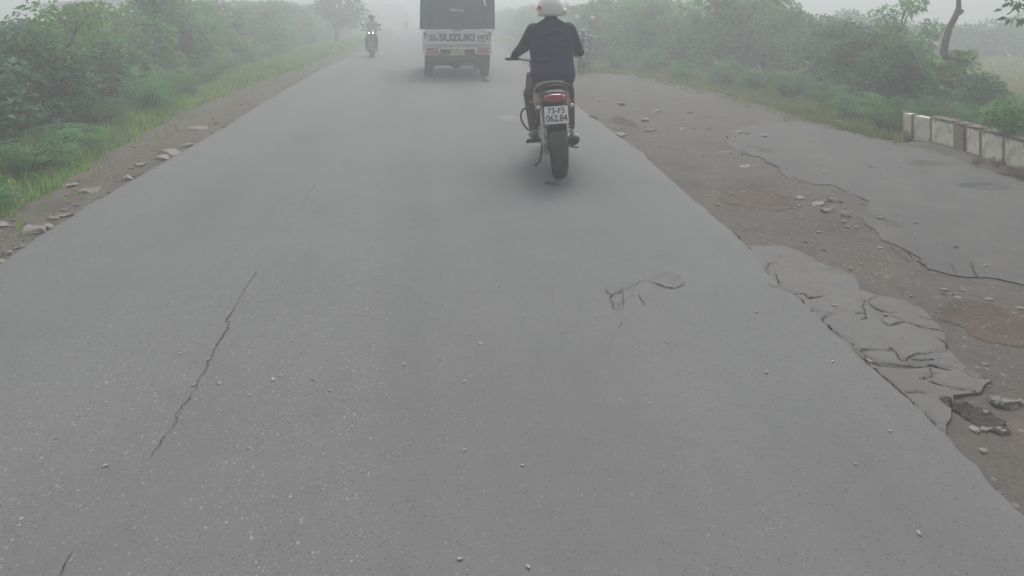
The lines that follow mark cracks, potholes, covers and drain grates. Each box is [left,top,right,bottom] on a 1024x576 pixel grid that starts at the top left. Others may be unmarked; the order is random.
crack [765,263,979,431]
crack [736,146,925,265]
crack [606,280,682,328]
crack [150,272,256,458]
